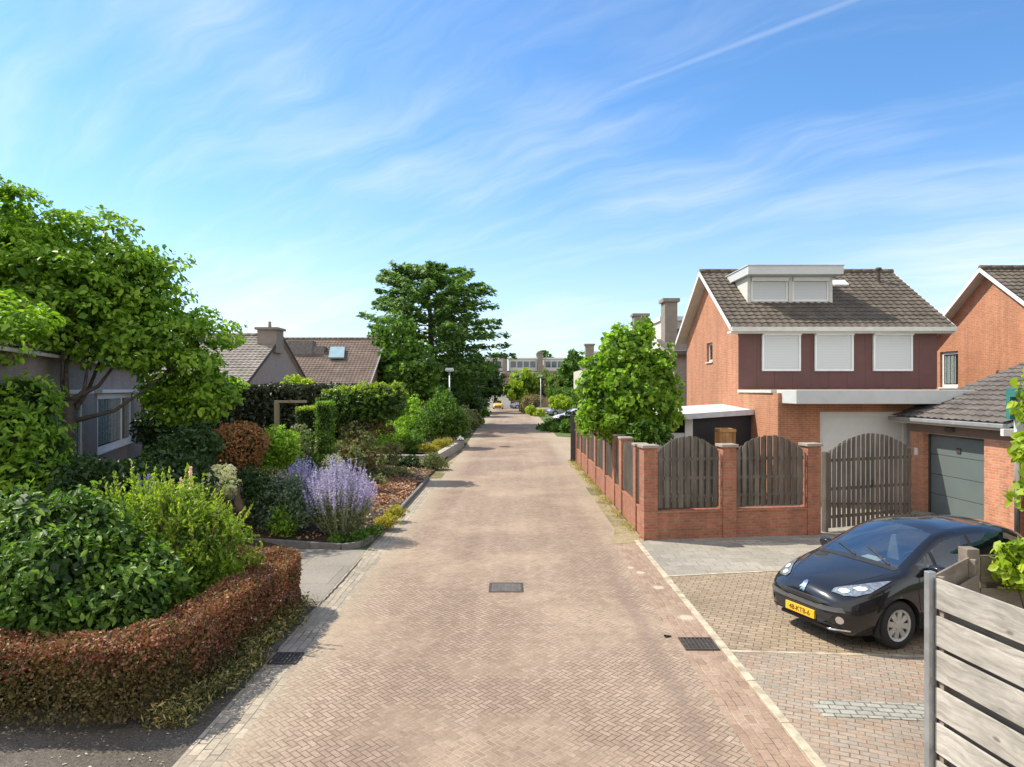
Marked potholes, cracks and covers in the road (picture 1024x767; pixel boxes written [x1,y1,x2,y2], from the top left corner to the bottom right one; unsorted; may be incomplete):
manhole cover [489,583,523,592]
drain grate [678,637,720,651]
drain grate [266,652,304,665]
